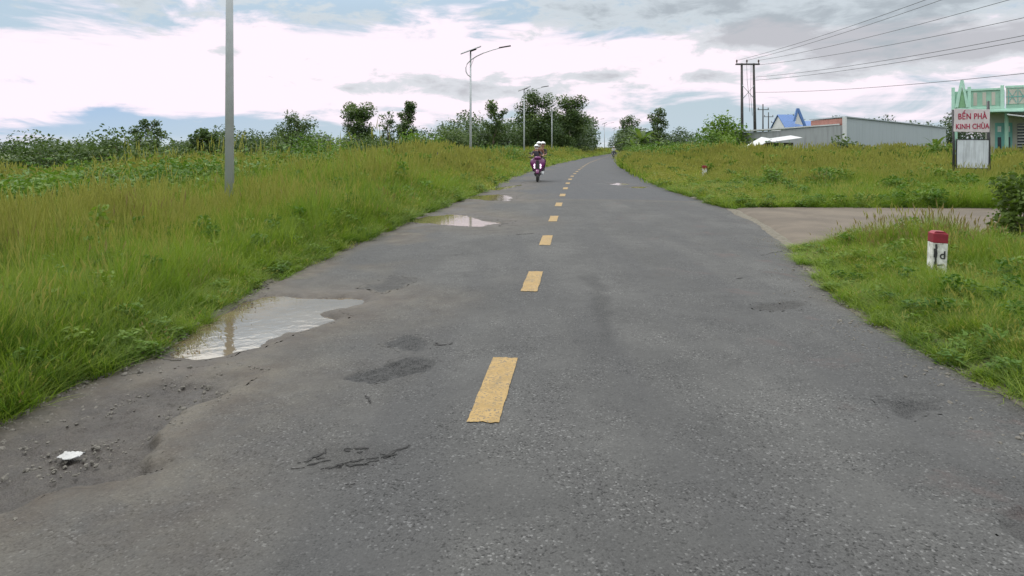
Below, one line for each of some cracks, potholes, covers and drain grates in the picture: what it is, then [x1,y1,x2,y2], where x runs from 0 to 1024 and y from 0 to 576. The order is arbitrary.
pothole [150,292,383,362]
pothole [0,363,263,517]
pothole [403,213,515,227]
crack [291,445,409,485]
